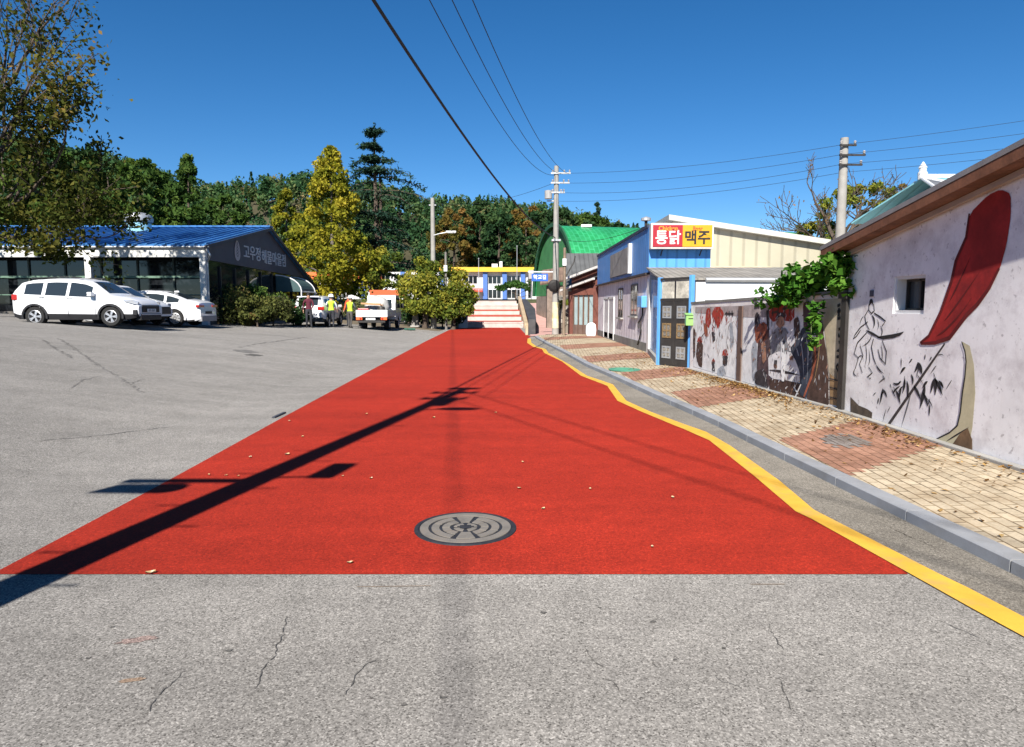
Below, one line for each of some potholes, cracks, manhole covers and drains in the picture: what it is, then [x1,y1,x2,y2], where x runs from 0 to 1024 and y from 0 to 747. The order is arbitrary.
crack [255,618,286,688]
crack [42,339,145,392]
manhole cover [414,512,517,546]
